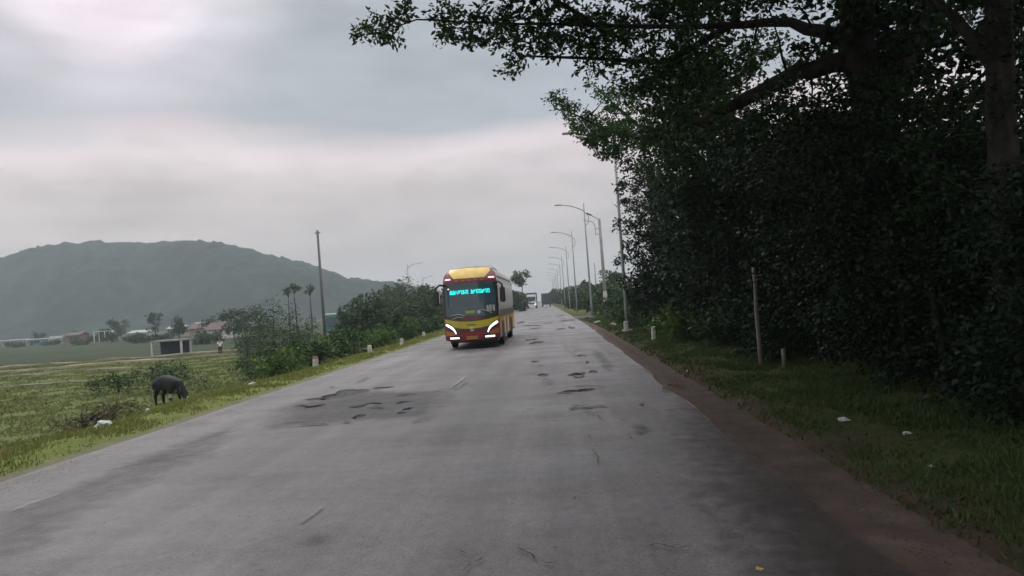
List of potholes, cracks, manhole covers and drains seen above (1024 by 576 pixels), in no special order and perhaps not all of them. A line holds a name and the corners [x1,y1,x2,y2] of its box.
crack [557,372,604,463]
pothole [320,389,370,400]
